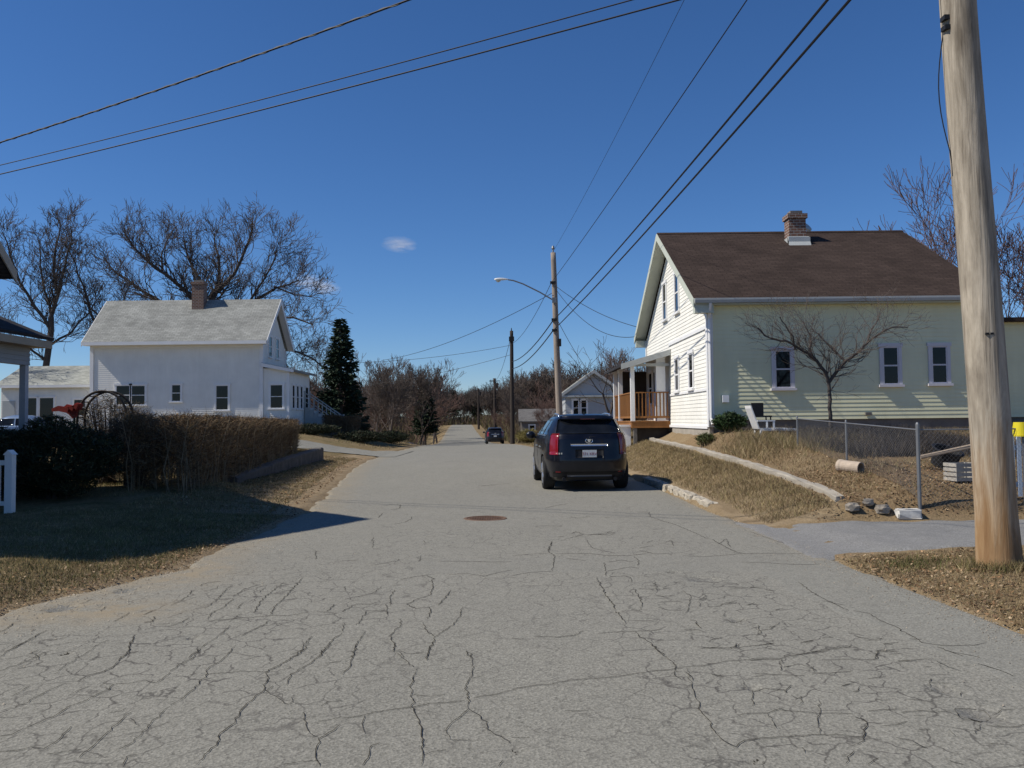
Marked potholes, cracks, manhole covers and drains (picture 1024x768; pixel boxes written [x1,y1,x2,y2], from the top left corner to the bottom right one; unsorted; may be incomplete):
crack [0,504,1024,766]
